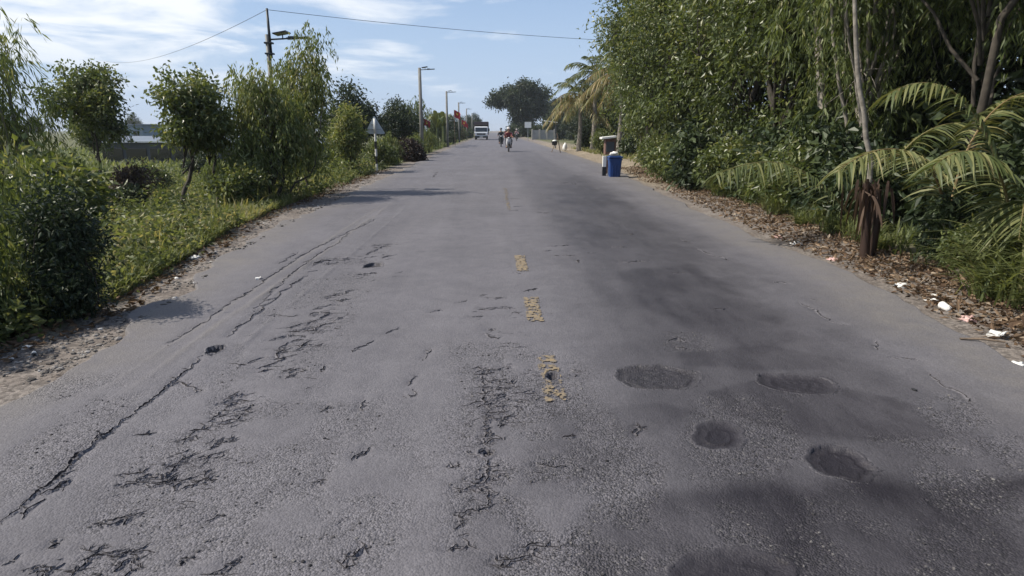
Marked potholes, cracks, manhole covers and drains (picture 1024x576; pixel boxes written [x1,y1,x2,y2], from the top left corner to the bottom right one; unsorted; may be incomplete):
crack [0,219,419,576]
pothole [663,545,800,576]
pothole [800,443,883,484]
pothole [202,344,227,357]
pothole [755,373,841,395]
crack [411,272,589,575]
pothole [688,419,749,452]
crack [871,341,971,401]
pothole [613,364,705,390]
pothole [543,371,561,382]
crack [800,299,844,325]
